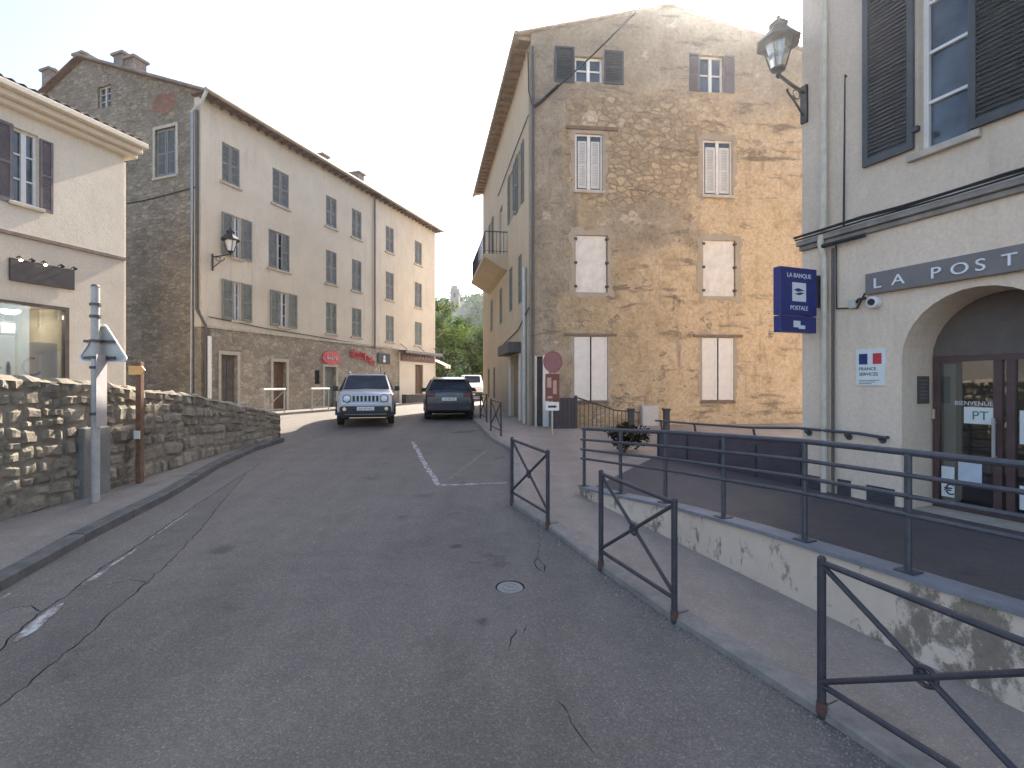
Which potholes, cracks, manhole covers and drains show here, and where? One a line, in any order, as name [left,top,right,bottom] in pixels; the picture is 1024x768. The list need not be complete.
manhole cover [495,580,525,594]
crack [558,701,596,756]
crack [0,474,246,706]
